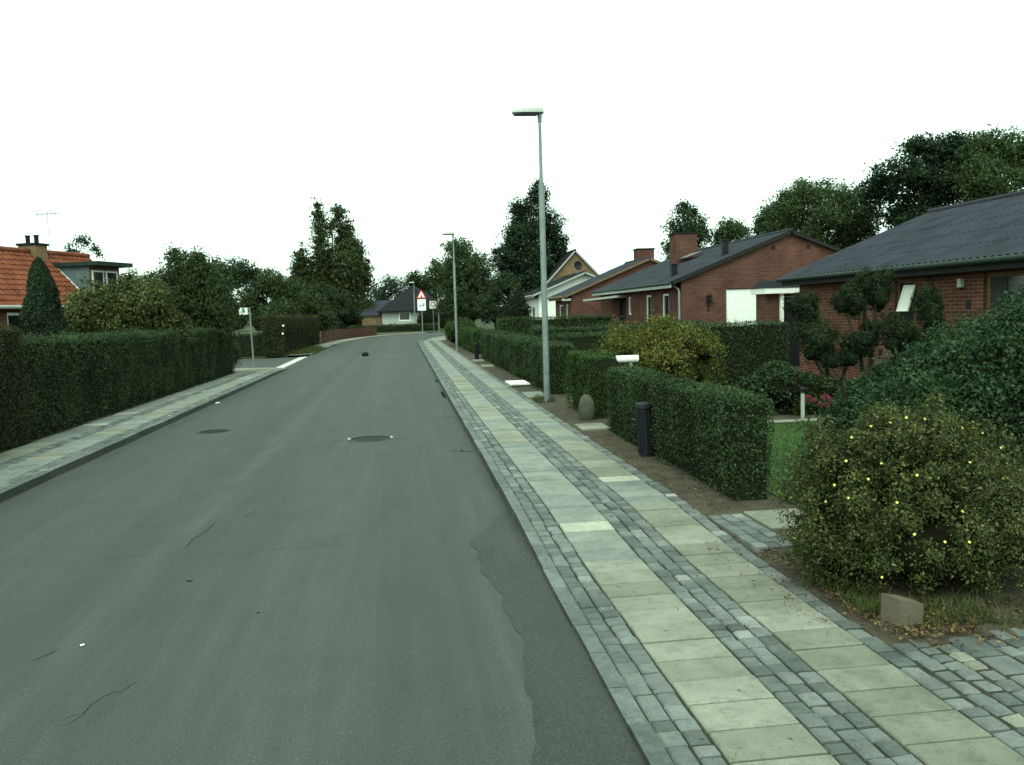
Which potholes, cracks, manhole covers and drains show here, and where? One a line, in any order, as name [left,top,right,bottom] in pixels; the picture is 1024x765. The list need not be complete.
crack [63,681,137,725]
